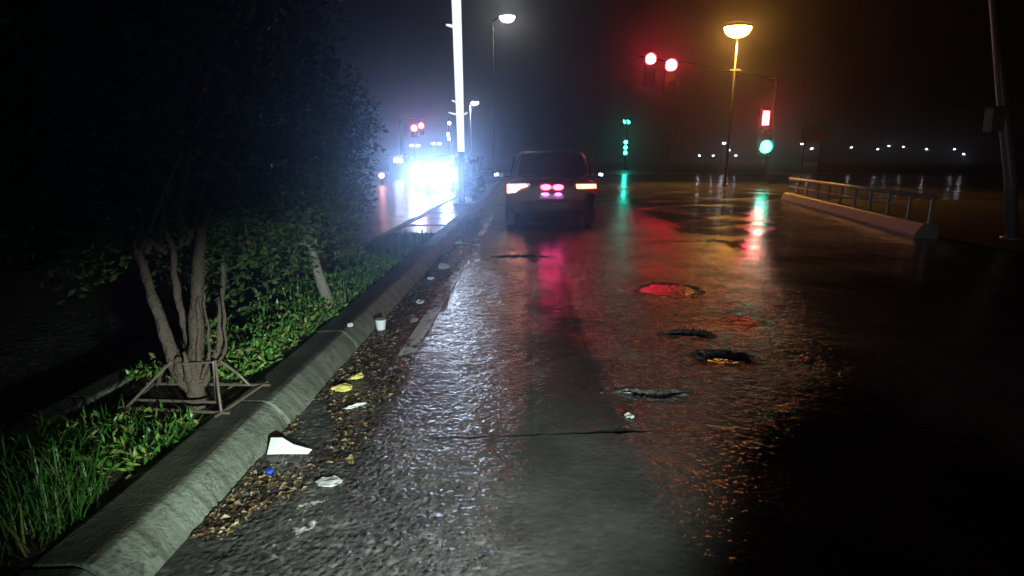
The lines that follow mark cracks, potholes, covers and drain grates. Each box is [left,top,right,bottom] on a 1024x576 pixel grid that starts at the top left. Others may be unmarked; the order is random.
pothole [680,347,759,367]
pothole [655,328,720,339]
crack [413,428,648,439]
pothole [634,282,705,299]
pothole [600,387,704,401]
